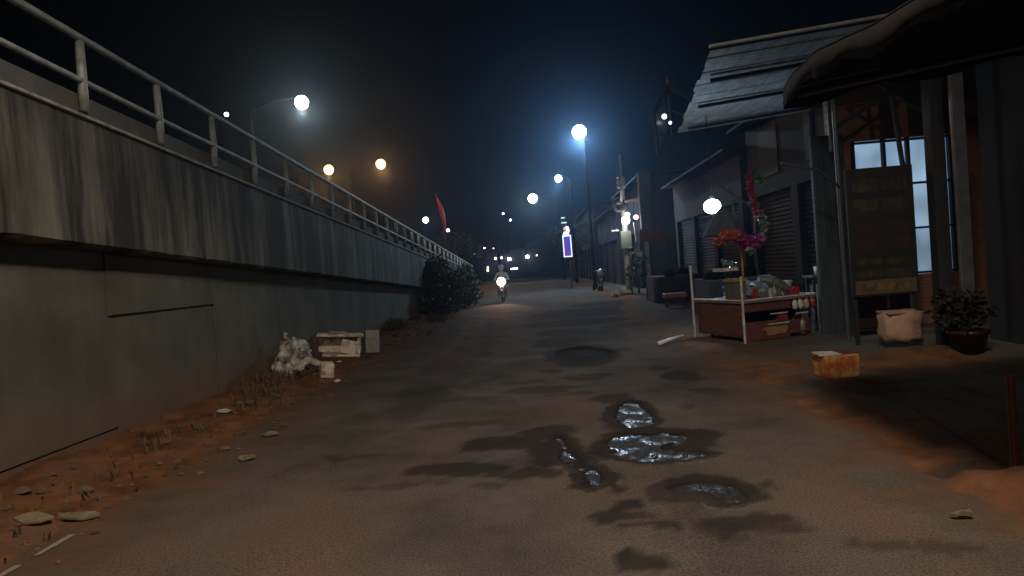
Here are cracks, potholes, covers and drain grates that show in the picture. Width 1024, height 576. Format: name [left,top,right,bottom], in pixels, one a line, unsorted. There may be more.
pothole [592,426,730,467]
pothole [602,398,669,435]
pothole [541,432,622,495]
pothole [547,345,621,365]
pothole [647,472,772,511]
